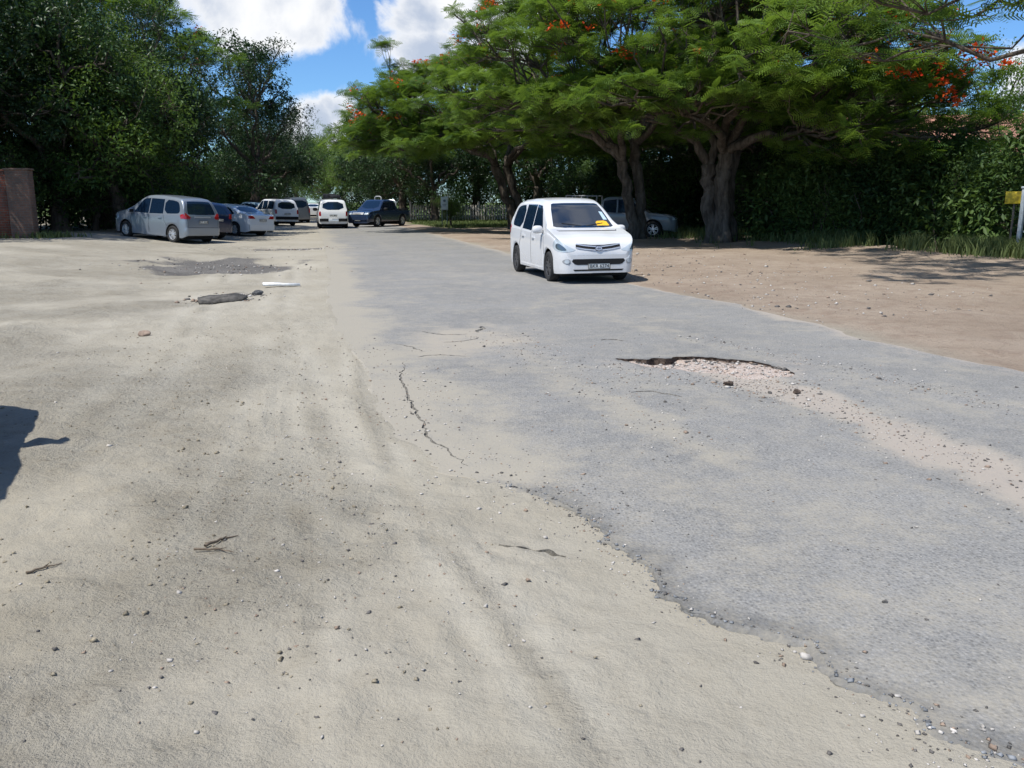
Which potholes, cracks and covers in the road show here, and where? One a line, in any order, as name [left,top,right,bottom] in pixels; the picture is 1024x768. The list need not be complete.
crack [397,326,486,466]
pothole [616,356,795,380]
